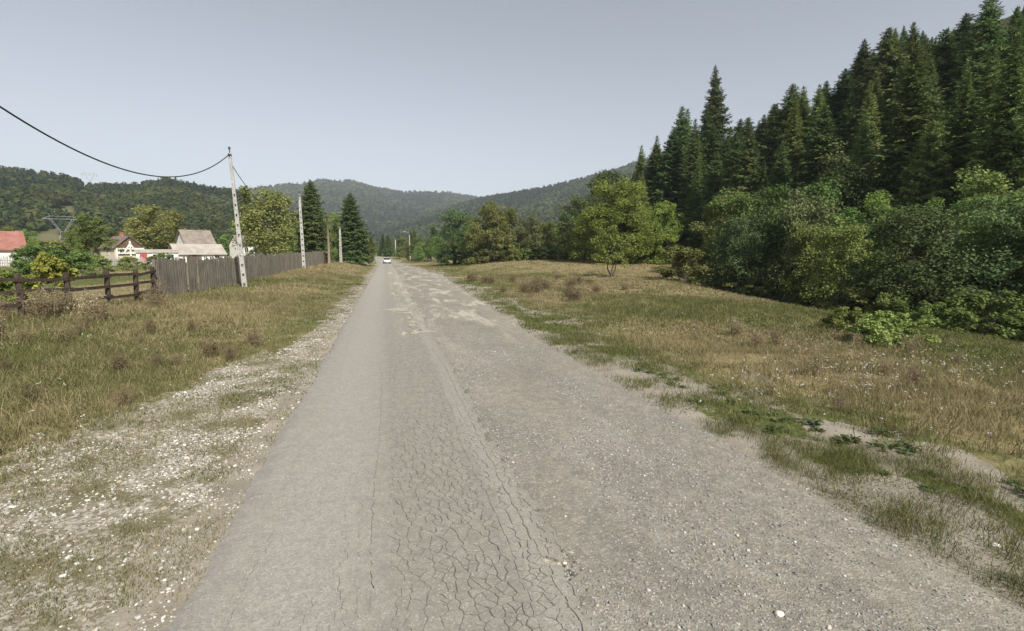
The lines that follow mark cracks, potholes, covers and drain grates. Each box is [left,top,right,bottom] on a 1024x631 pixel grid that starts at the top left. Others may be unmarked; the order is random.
crack [387,328,593,631]
